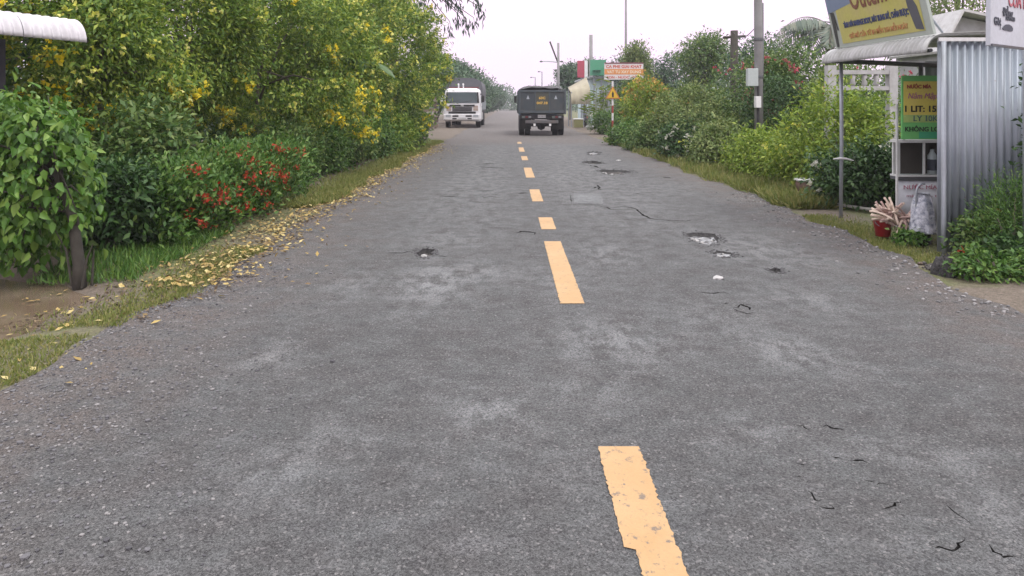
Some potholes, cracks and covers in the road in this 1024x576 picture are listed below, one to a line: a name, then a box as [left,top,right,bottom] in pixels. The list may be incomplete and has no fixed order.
crack [928,506,970,552]
pothole [410,246,439,259]
crack [989,545,1023,559]
crack [570,185,702,221]
crack [699,292,757,318]
pothole [705,249,744,259]
pothole [682,230,728,247]
